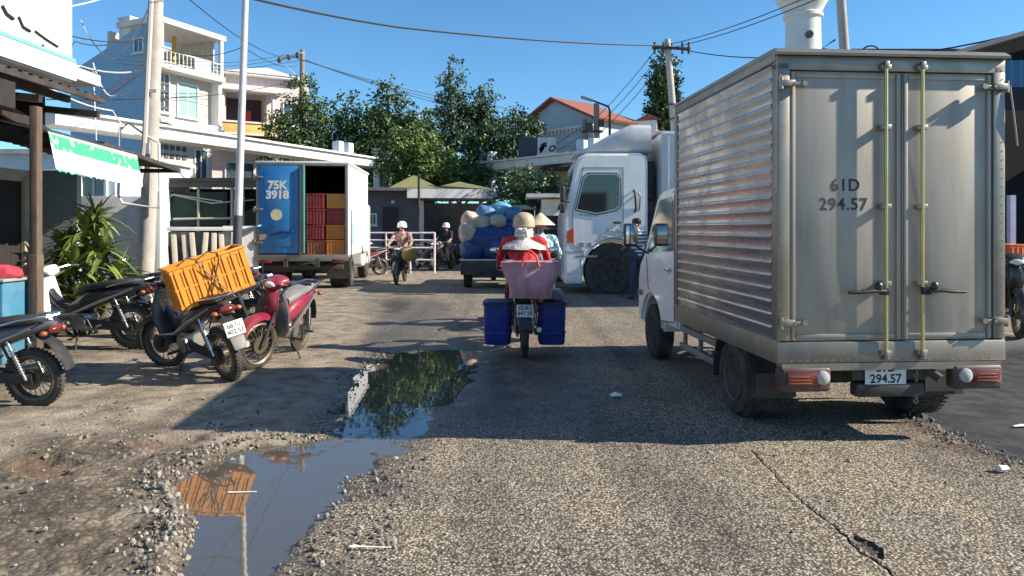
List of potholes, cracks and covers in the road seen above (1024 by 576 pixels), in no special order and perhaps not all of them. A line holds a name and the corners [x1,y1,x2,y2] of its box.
crack [751,450,893,576]
pothole [160,437,382,576]
